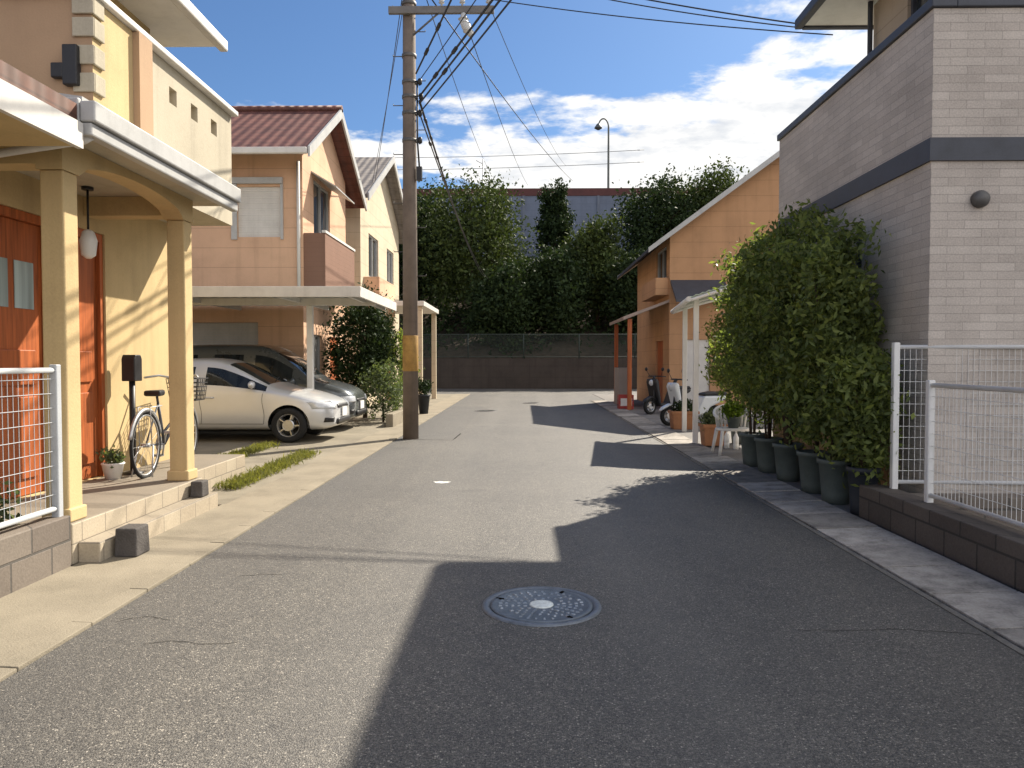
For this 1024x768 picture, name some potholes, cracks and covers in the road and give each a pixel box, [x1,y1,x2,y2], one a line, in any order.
manhole cover [482,586,602,627]
